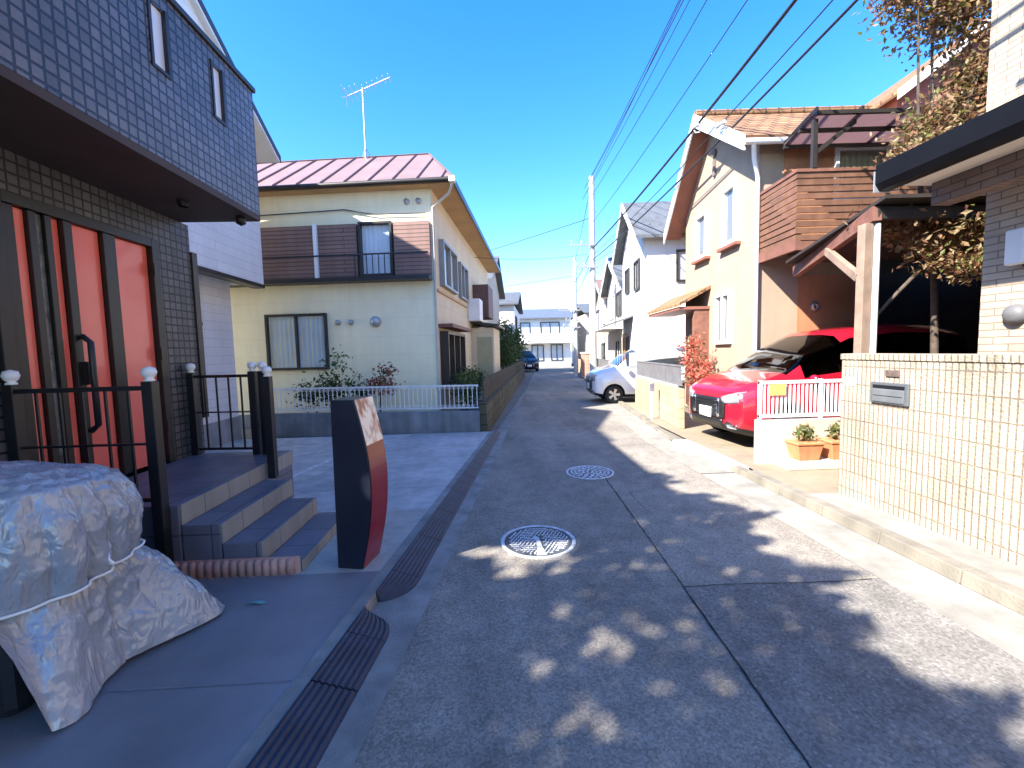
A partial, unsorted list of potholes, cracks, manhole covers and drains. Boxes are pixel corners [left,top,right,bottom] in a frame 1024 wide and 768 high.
manhole cover [501,525,576,559]
manhole cover [566,465,614,480]
